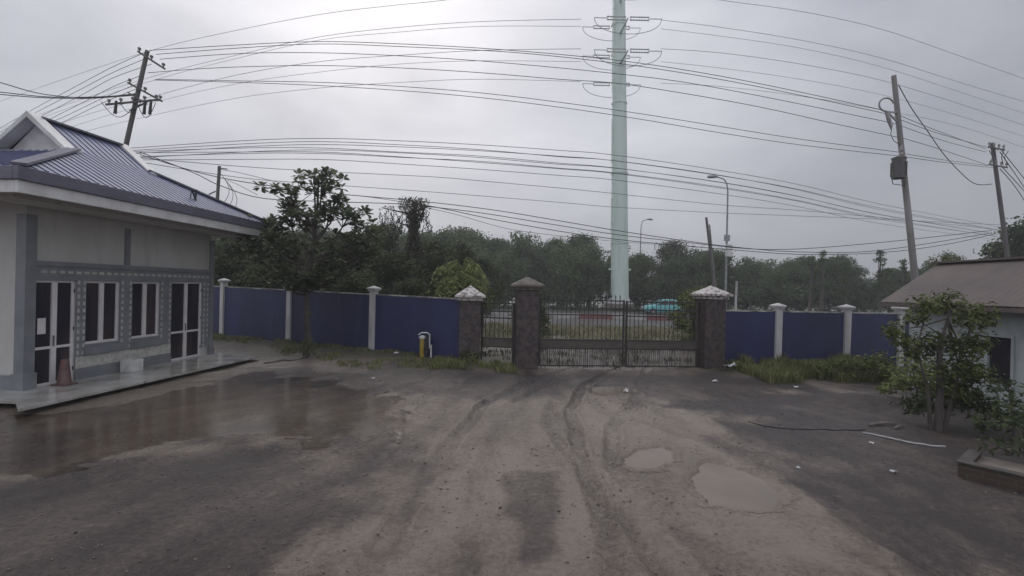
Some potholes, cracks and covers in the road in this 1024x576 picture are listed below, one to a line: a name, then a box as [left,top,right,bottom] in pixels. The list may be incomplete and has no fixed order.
pothole [682,458,800,515]
pothole [611,443,683,473]
